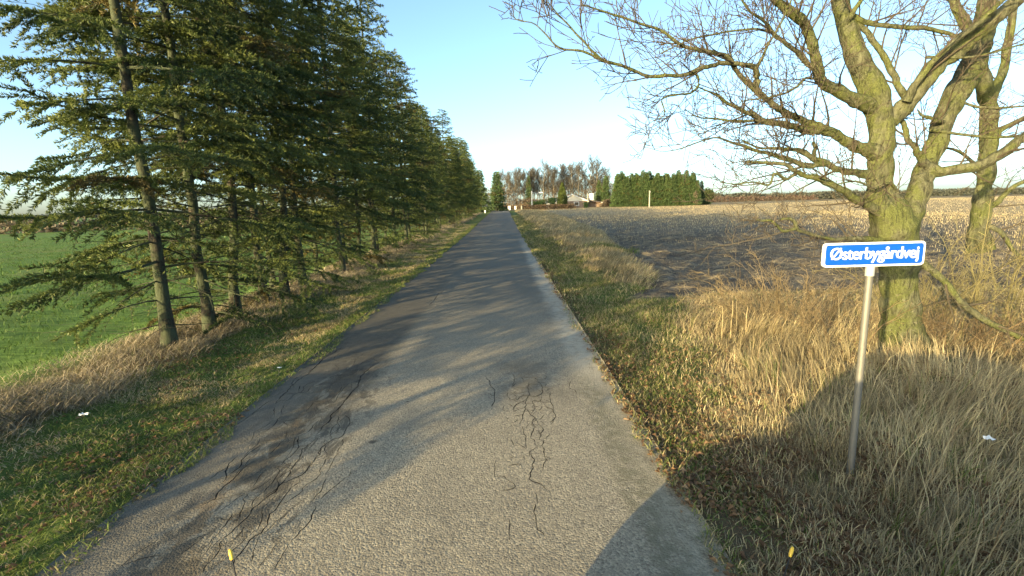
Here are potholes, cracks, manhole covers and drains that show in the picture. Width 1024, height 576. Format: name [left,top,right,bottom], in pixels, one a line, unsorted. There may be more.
crack [121,351,375,573]
crack [485,374,576,536]
